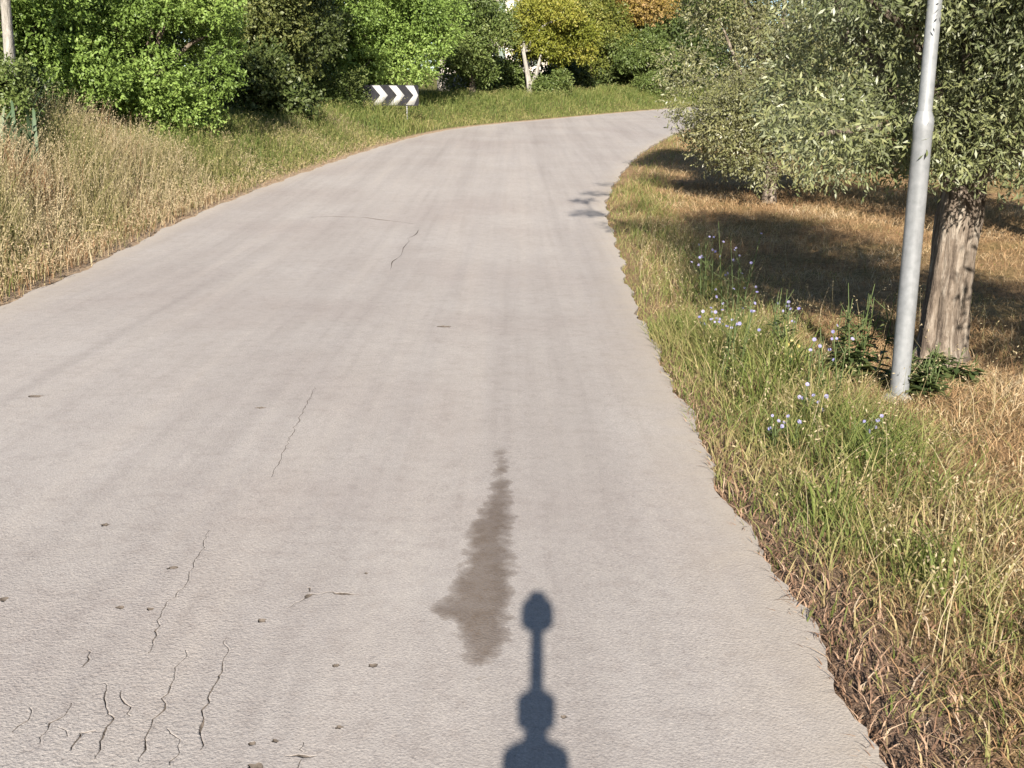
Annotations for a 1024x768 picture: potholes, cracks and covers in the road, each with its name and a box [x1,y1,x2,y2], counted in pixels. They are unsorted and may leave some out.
crack [270,387,317,477]
crack [284,742,317,768]
crack [308,216,420,269]
crack [10,530,231,765]
crack [287,587,359,608]
